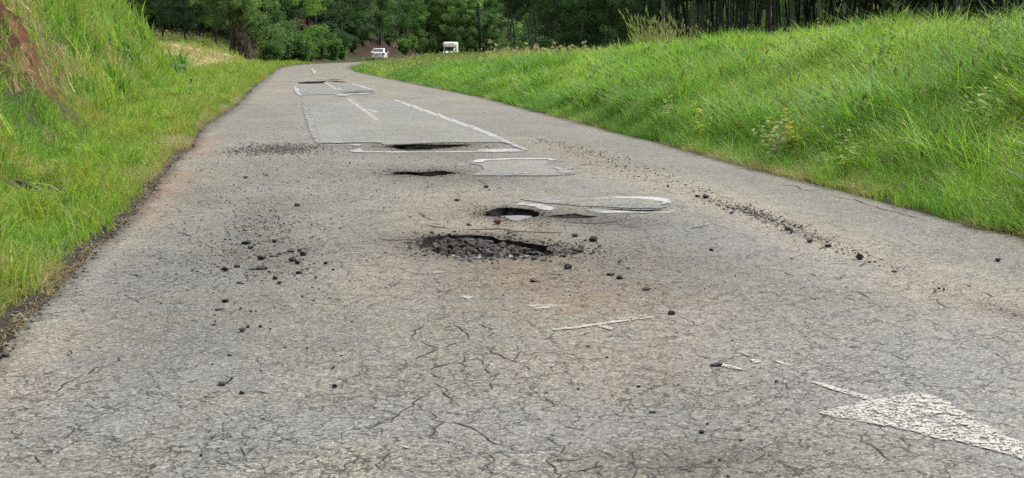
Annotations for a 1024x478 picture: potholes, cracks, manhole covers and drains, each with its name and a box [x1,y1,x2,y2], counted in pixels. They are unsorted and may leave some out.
pothole [483,208,540,220]
crack [323,324,641,478]
pothole [419,235,553,258]
crack [1,350,123,465]
